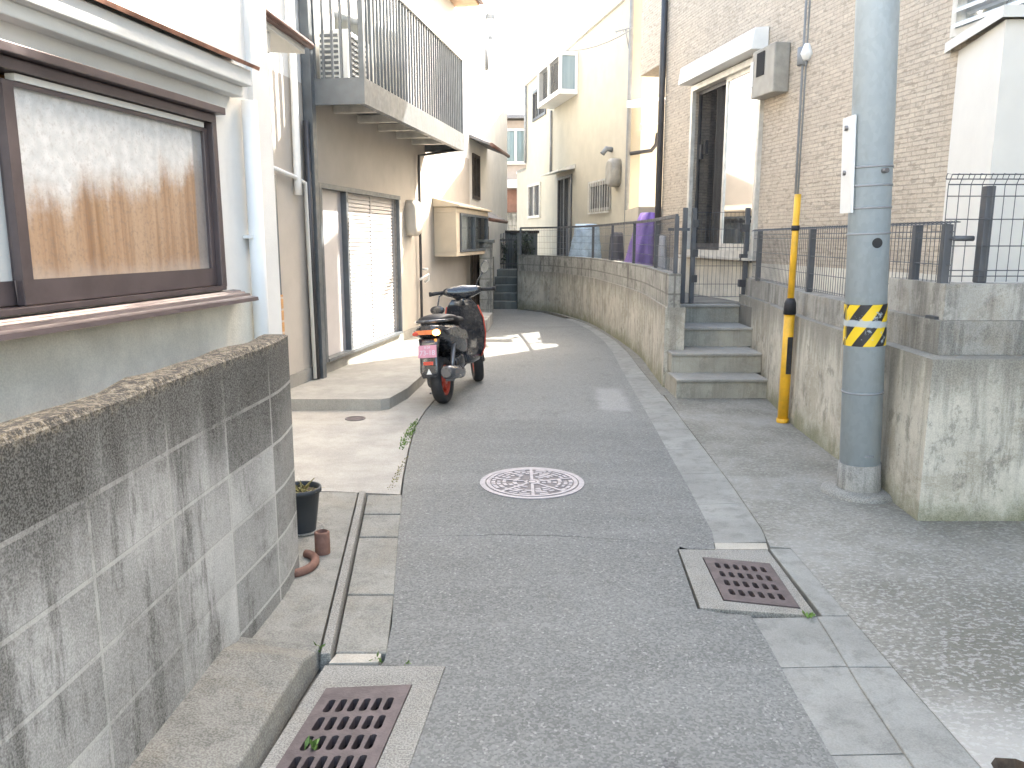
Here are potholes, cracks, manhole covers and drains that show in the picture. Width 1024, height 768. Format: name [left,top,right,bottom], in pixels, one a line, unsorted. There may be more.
drain grate [260,665,445,768]
manhole cover [480,467,584,500]
drain grate [679,549,816,618]
